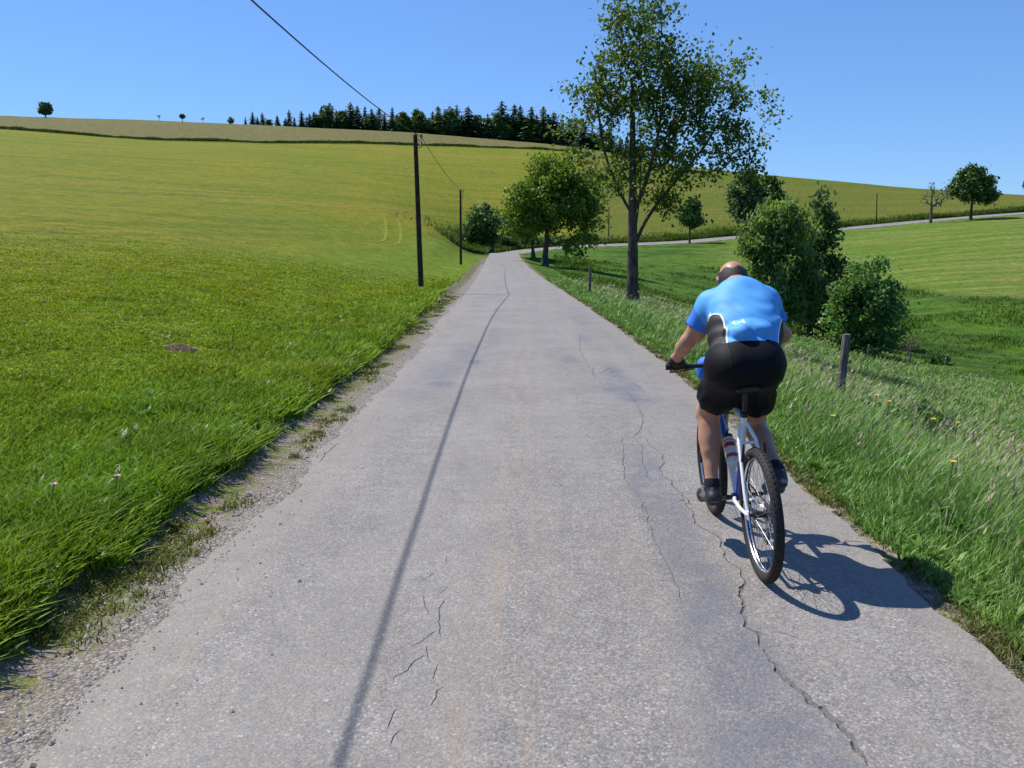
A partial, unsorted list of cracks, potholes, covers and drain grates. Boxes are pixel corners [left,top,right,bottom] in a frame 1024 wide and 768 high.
crack [579,336,868,766]
